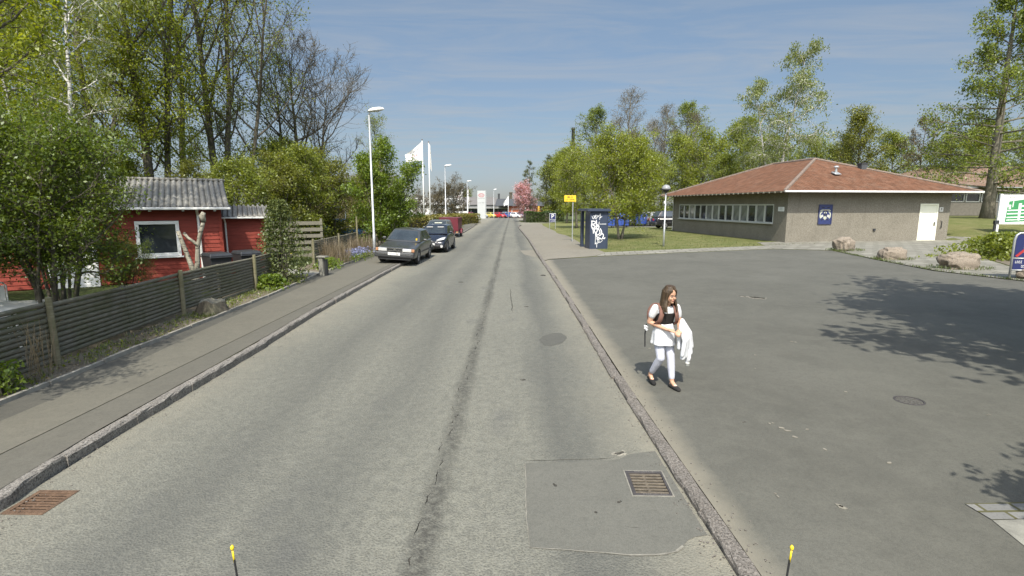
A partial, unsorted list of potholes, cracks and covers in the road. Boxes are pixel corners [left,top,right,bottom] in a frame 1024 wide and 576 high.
drain grate [0,490,80,515]
drain grate [623,470,675,497]
manhole cover [893,396,926,405]
